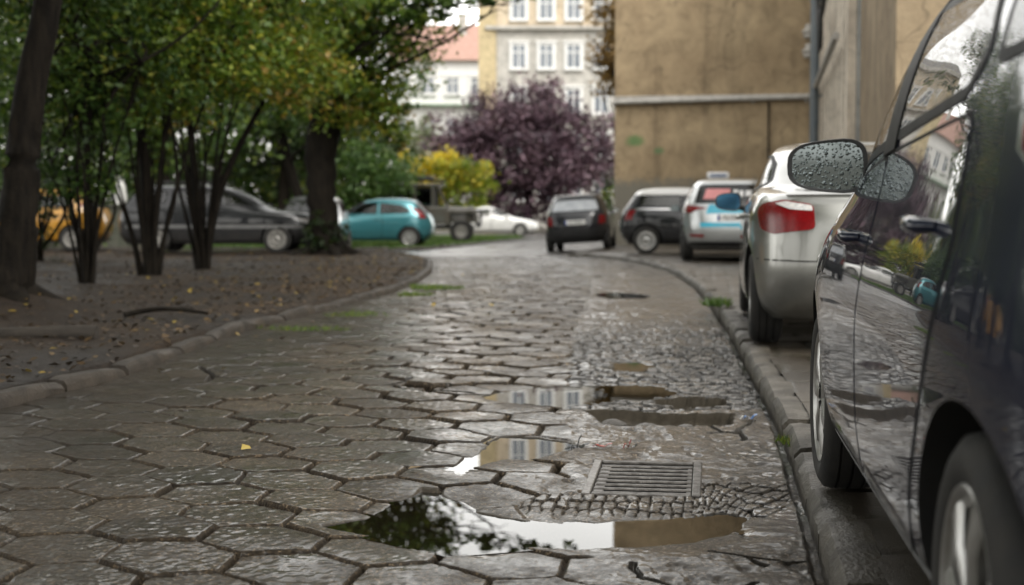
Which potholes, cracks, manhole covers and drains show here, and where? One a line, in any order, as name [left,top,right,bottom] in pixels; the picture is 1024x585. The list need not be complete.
pothole [478,385,677,410]
pothole [443,435,586,476]
pothole [316,486,751,560]
drain grate [581,460,702,498]
crack [706,420,758,441]
pothole [581,409,736,427]
pothole [652,396,728,410]
crack [626,550,809,585]
pothole [599,361,655,372]
